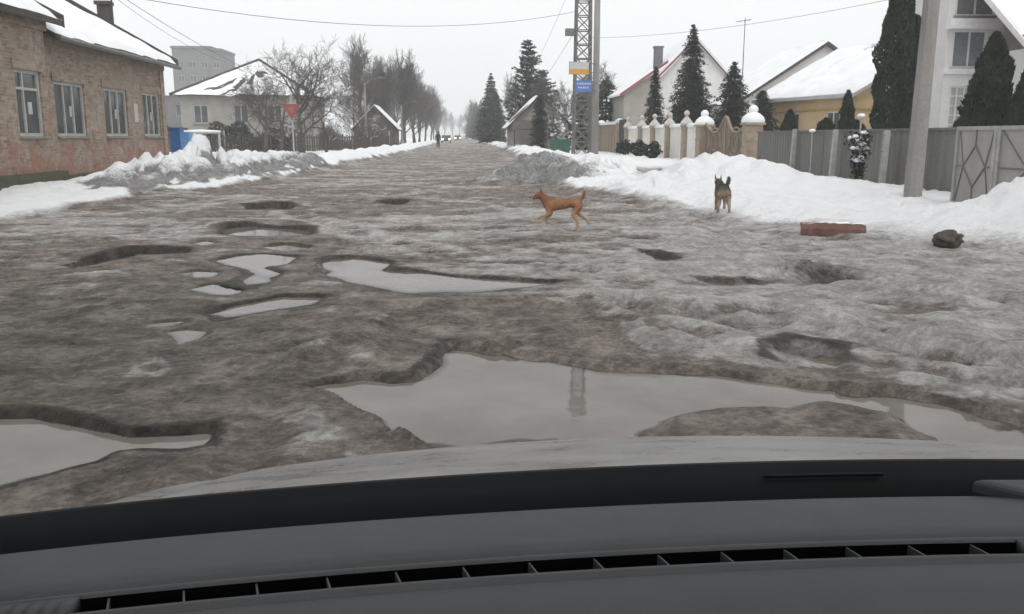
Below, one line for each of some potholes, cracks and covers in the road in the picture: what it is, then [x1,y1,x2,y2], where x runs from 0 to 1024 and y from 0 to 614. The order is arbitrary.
pothole [217,221,314,235]
pothole [637,249,682,261]
pothole [197,293,330,322]
pothole [63,245,196,268]
pothole [184,282,251,296]
pothole [0,406,225,489]
pothole [692,276,776,285]
pothole [298,336,1024,448]
pothole [158,327,214,347]
pothole [205,253,302,289]
pothole [243,201,300,210]
pothole [307,254,570,294]
